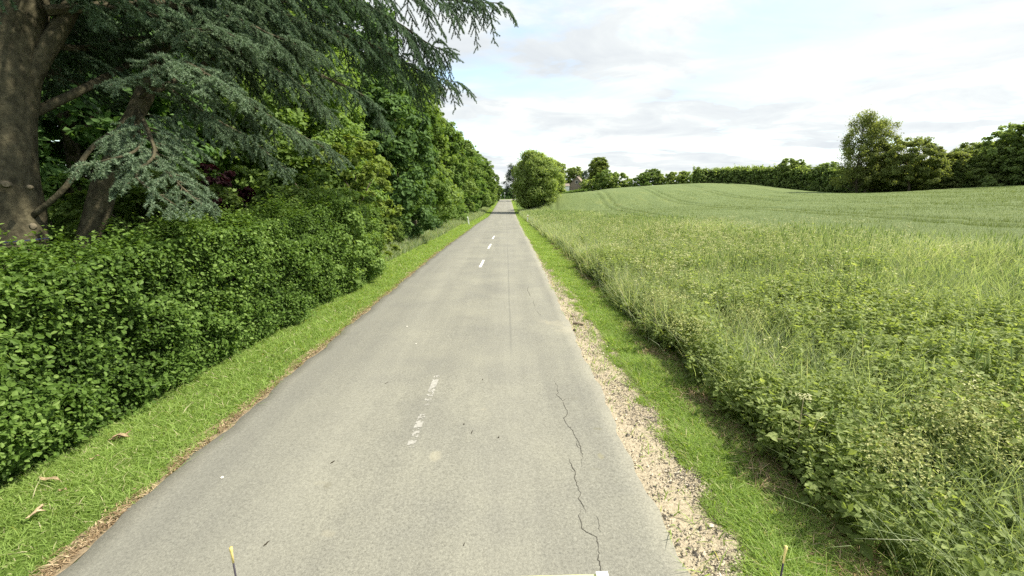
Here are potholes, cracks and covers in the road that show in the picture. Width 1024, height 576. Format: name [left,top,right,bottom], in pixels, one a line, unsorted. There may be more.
crack [556,384,601,570]
